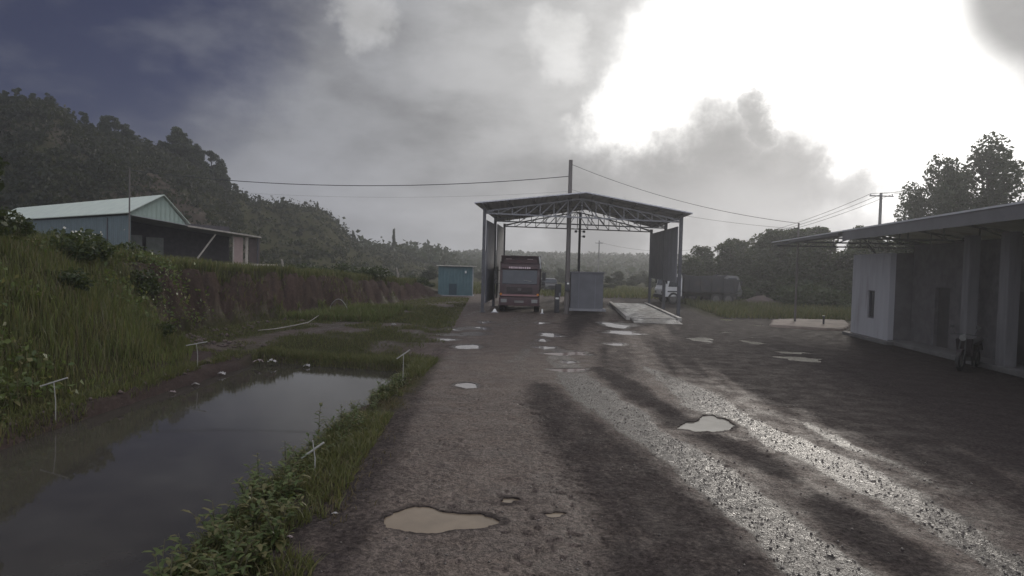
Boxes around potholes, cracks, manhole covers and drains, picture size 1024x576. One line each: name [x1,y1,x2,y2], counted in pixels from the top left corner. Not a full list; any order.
pothole [374,502,510,540]
pothole [586,320,647,330]
pothole [525,331,579,339]
pothole [754,354,838,365]
pothole [670,413,746,434]
pothole [534,509,574,521]
pothole [442,343,492,351]
